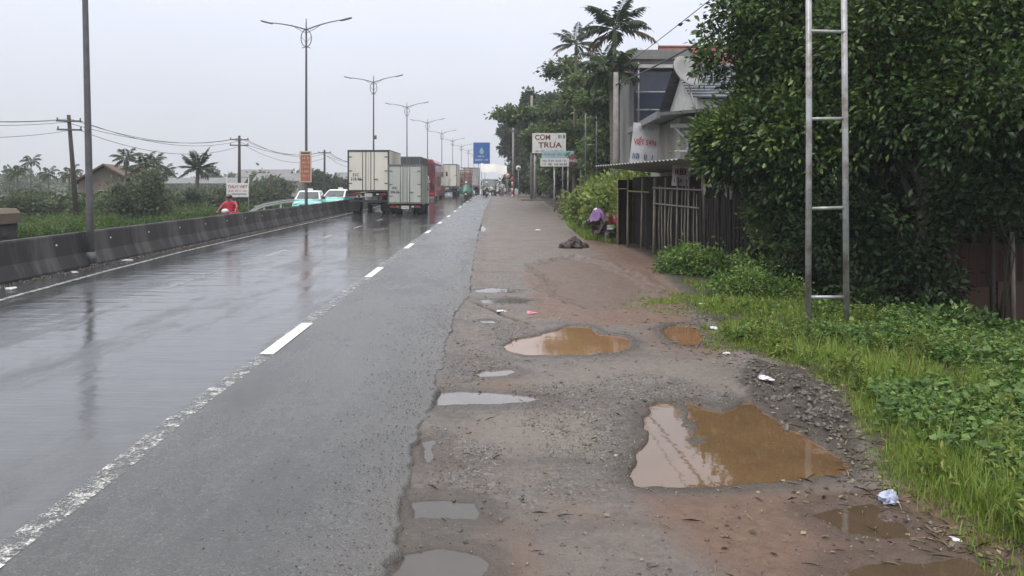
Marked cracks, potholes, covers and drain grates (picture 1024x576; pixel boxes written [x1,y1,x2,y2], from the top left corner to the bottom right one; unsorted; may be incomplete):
pothole [472,296,541,305]
pothole [412,430,454,470]
pothole [434,385,565,409]
pothole [653,322,713,347]
pothole [808,543,1020,576]
pothole [465,366,530,379]
pothole [790,492,942,548]
pothole [493,324,642,358]
pothole [386,534,511,576]
pothole [400,486,500,528]
pothole [612,396,867,493]
